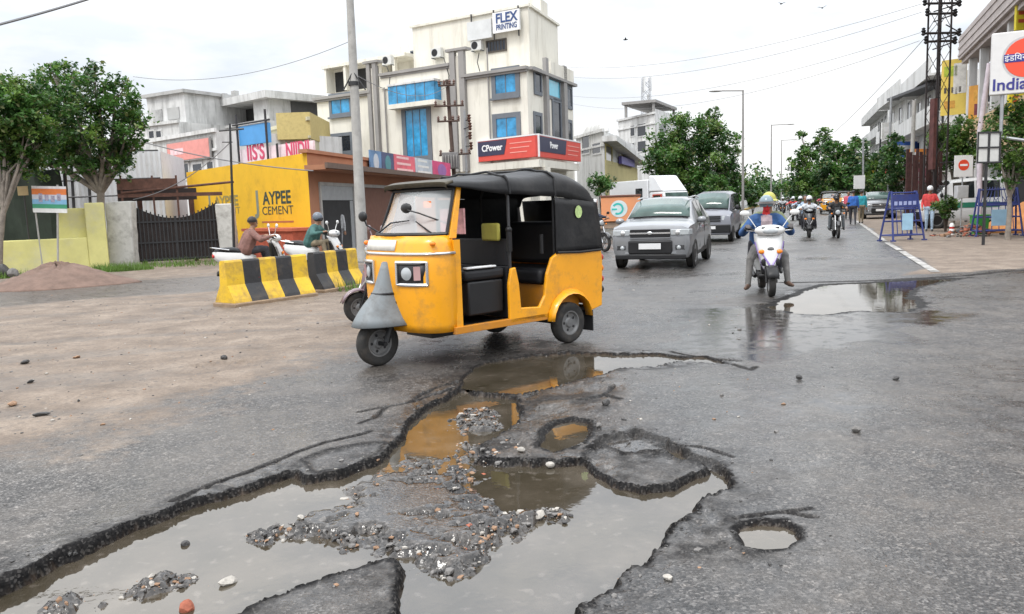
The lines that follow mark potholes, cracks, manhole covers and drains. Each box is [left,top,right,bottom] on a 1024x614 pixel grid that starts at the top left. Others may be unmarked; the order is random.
crack [669,440,735,458]
pothole [758,277,975,315]
pothole [729,517,807,551]
crack [166,379,462,503]
pothole [0,387,739,614]
crack [732,507,820,520]
pothole [458,351,729,396]
